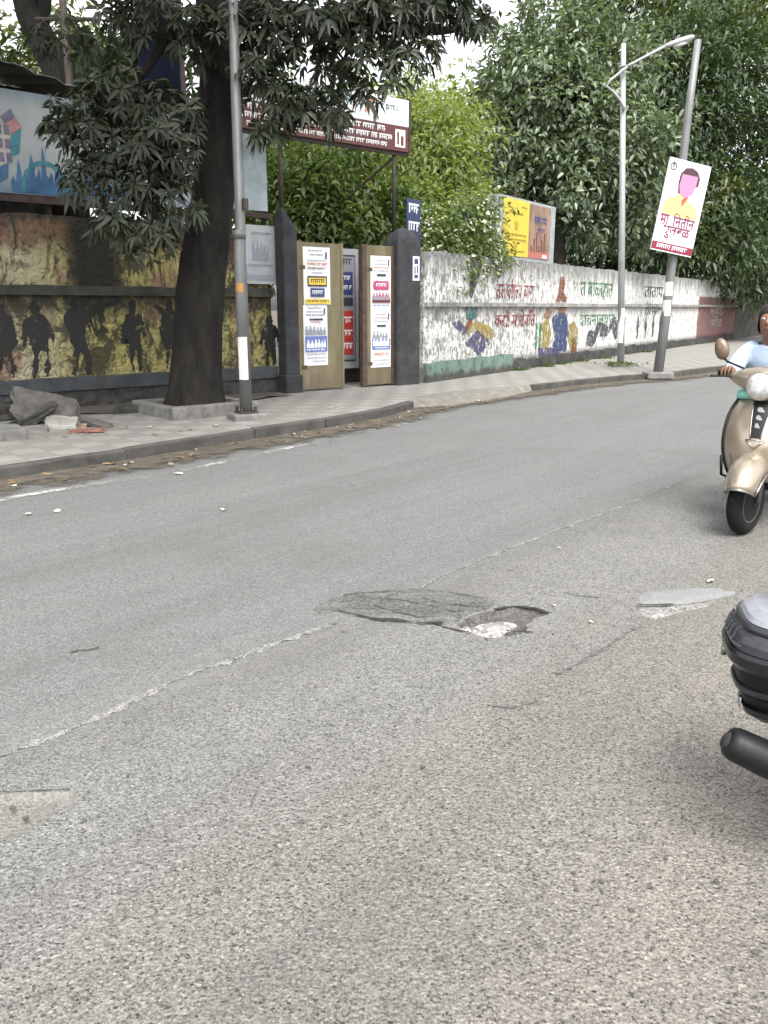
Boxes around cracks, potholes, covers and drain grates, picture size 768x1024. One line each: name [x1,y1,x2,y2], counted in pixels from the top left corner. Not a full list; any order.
crack [554,626,640,674]
pothole [457,607,553,637]
crack [486,700,538,709]
